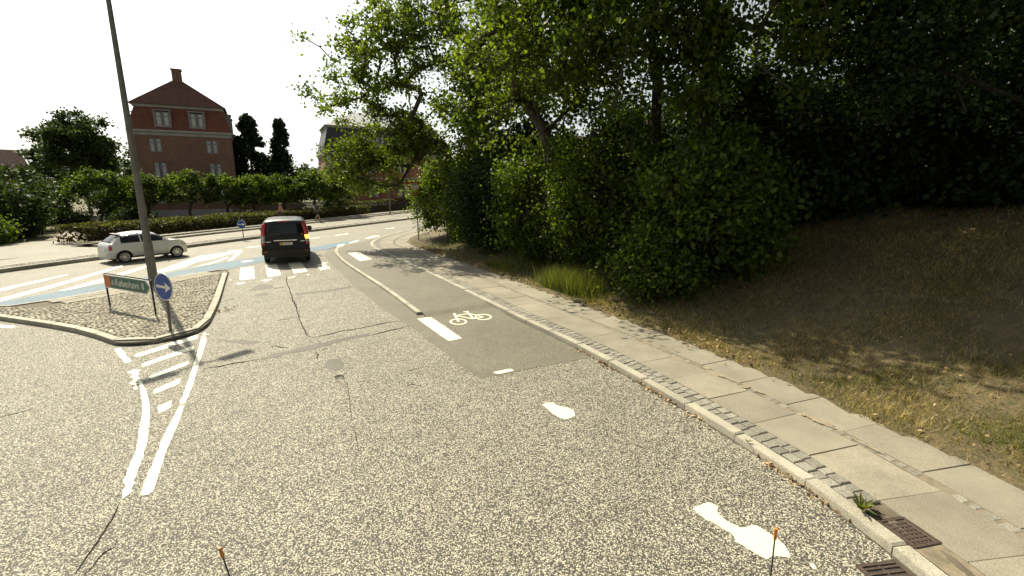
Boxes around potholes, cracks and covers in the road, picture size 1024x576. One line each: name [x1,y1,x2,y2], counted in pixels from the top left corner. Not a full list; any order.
crack [203,277,409,369]
drain grate [855,560,914,576]
